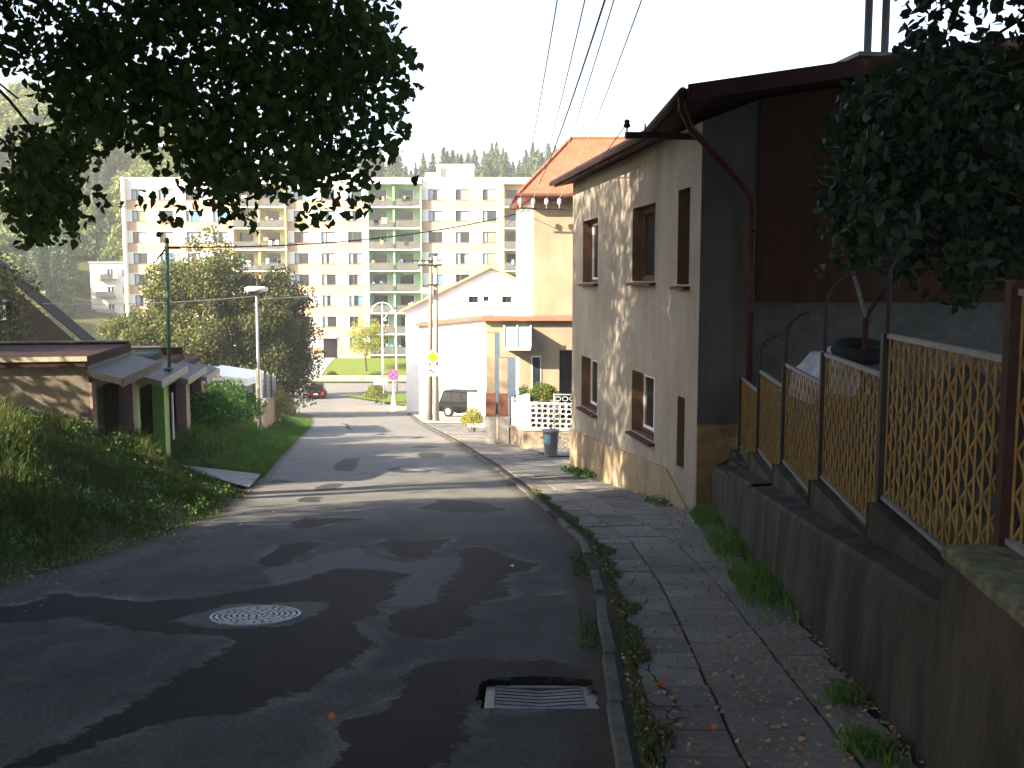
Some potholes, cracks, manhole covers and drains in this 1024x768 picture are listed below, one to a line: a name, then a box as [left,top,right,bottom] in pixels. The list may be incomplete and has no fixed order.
drain grate [484,685,600,710]
manhole cover [209,605,301,626]
crack [643,664,689,768]
